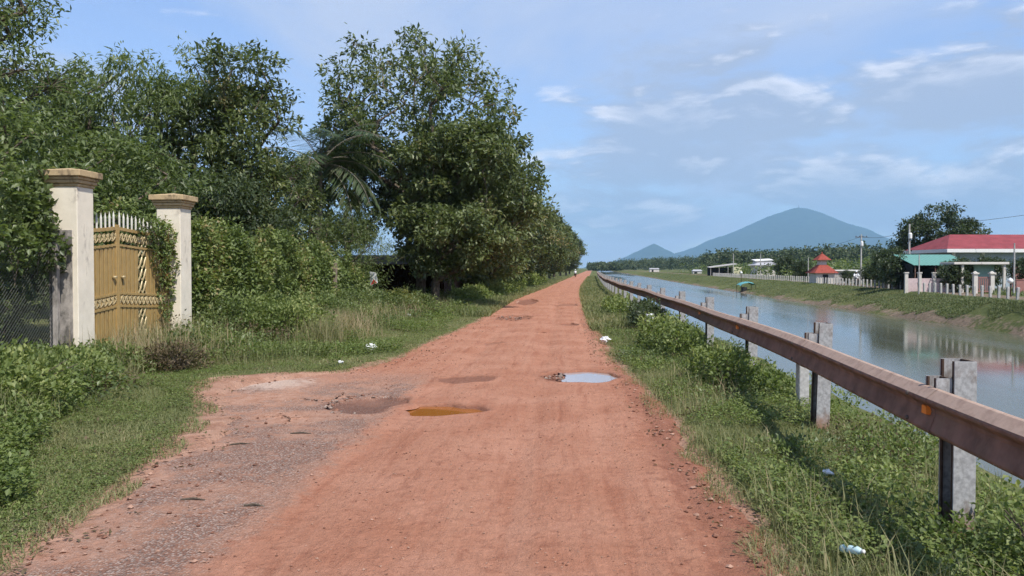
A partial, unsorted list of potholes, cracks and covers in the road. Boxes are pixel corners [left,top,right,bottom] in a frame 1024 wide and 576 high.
pothole [513,298,541,306]
pothole [384,401,498,418]
pothole [314,394,420,416]
pothole [430,374,502,385]
pothole [529,369,635,384]
